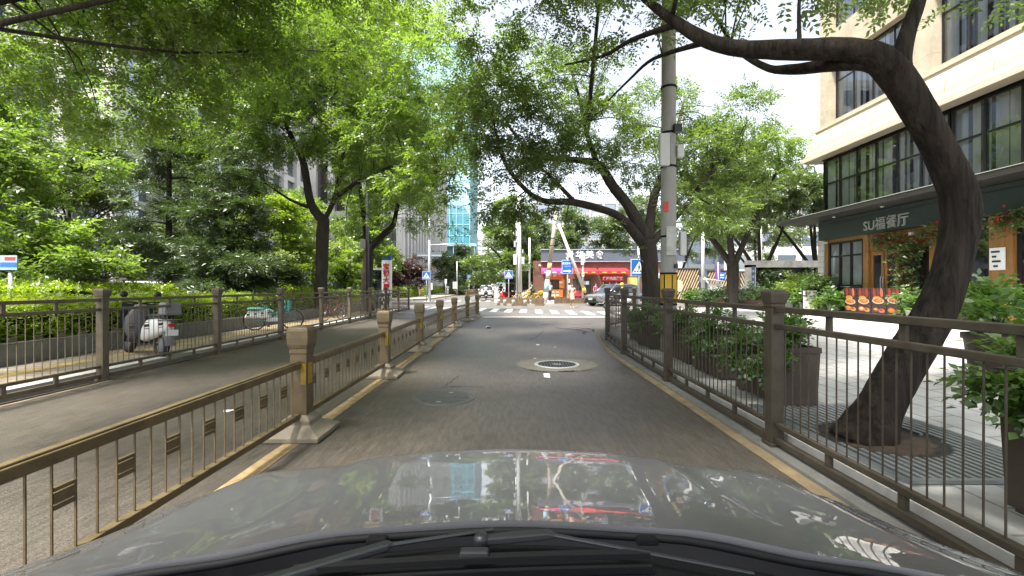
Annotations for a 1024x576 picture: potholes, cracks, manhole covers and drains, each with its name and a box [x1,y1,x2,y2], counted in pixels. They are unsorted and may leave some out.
manhole cover [413,390,475,406]
manhole cover [516,358,598,372]
